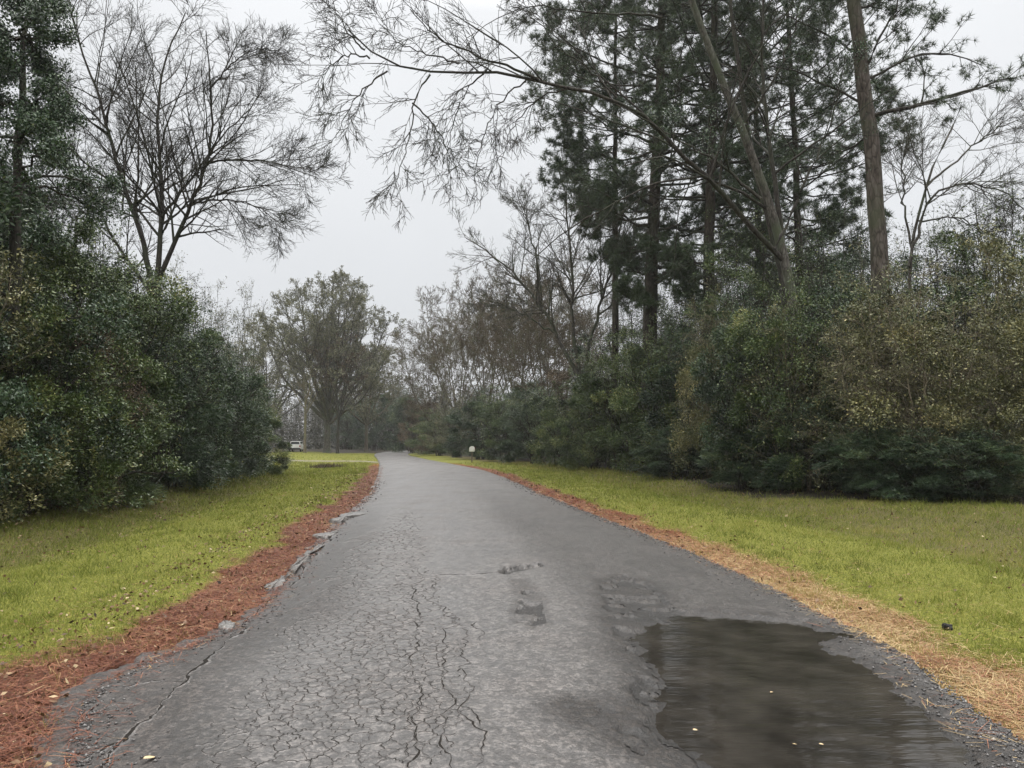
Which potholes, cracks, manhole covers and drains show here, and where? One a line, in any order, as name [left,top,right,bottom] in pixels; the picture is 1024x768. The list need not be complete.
crack [82,508,495,768]
pothole [515,590,546,626]
pothole [574,575,977,768]
